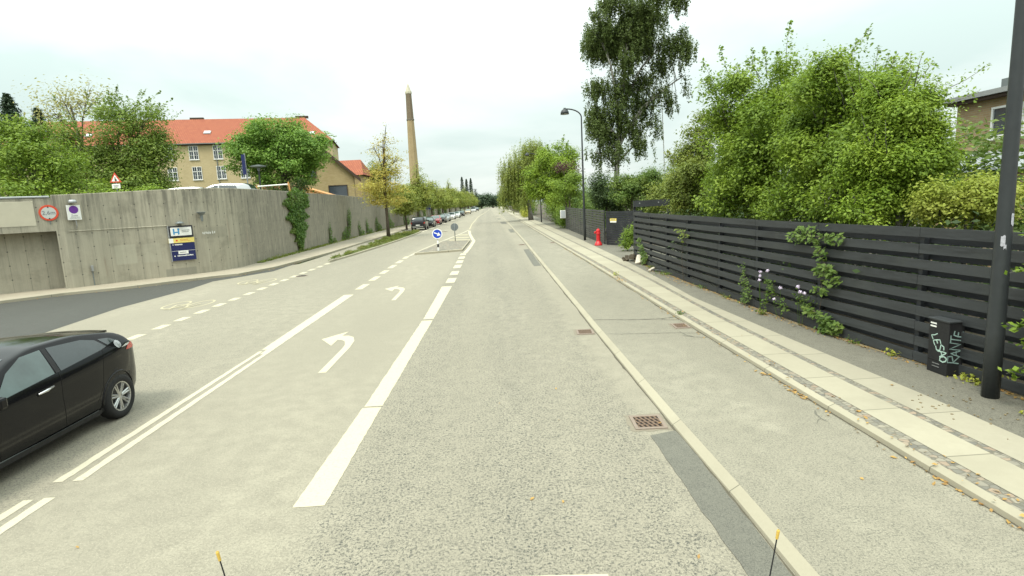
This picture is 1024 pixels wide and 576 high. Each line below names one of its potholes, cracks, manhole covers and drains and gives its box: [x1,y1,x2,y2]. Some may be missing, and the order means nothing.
drain grate [624,413,672,432]
